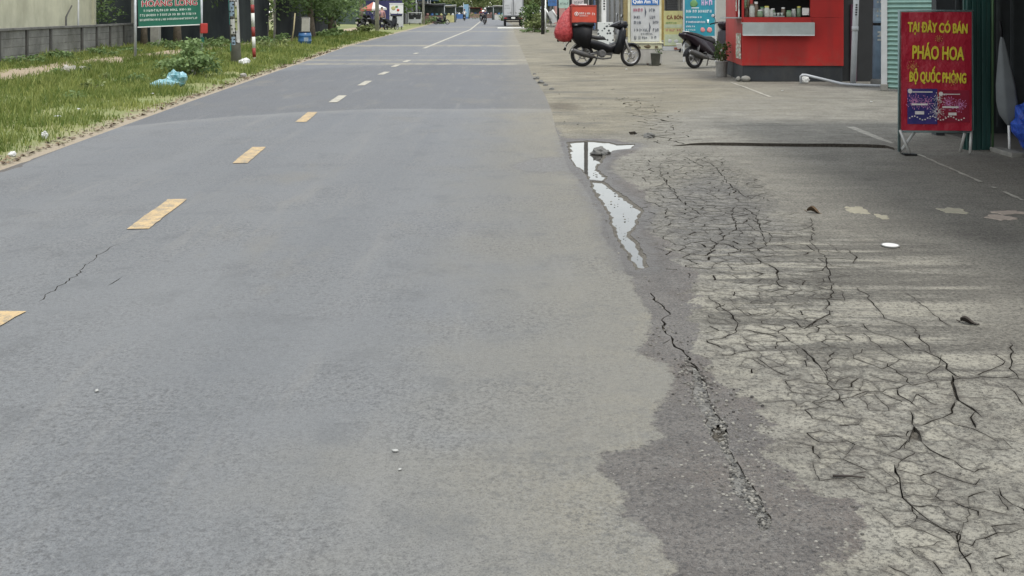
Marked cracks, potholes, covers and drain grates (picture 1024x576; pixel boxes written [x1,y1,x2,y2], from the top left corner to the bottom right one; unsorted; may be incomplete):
pothole [711,428,727,443]
crack [40,244,118,301]
crack [620,153,1024,575]
